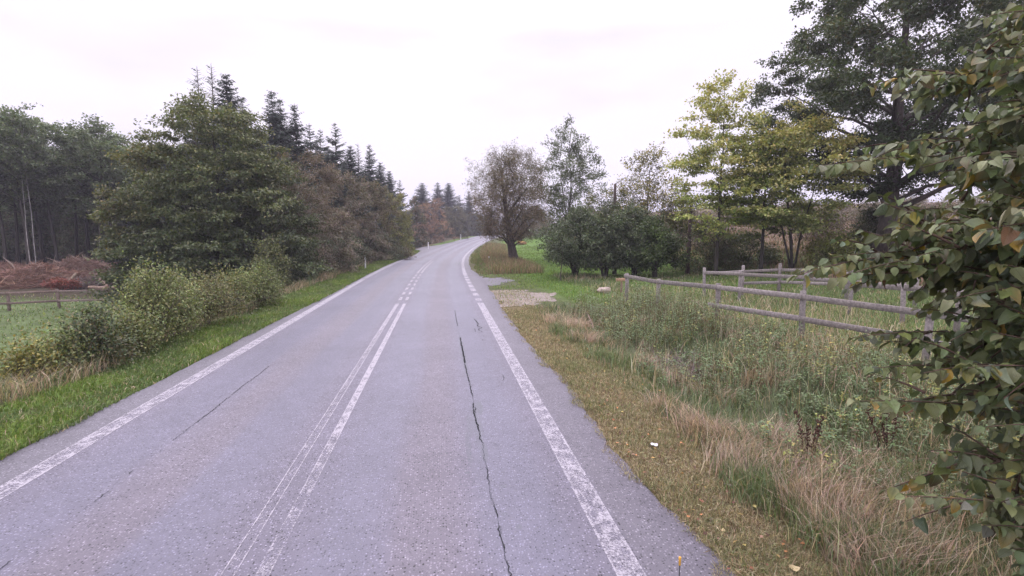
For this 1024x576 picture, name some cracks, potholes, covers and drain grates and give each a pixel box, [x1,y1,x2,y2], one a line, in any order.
crack [0,366,269,569]
crack [455,315,512,576]
